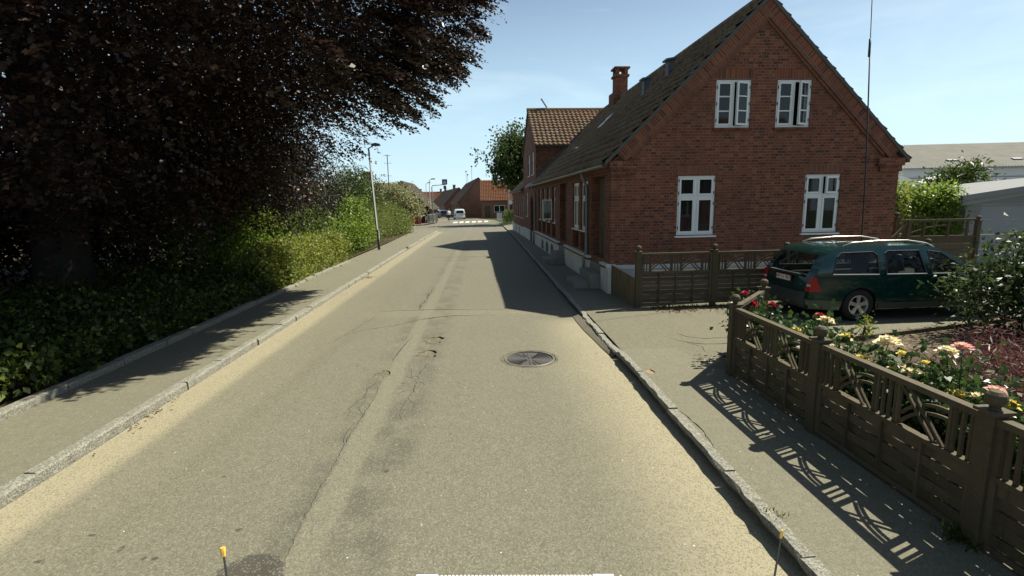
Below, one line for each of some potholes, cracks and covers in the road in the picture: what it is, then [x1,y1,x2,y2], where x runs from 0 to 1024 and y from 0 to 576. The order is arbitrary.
pothole [416,350,437,359]
crack [285,383,378,558]
crack [314,291,559,419]
manhole cover [500,350,559,368]
pothole [423,336,444,348]
